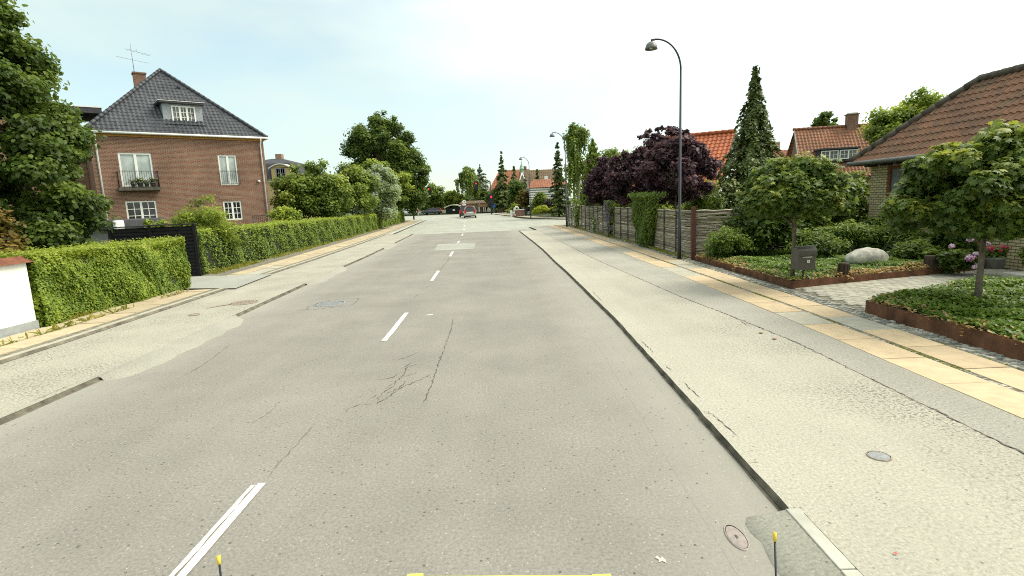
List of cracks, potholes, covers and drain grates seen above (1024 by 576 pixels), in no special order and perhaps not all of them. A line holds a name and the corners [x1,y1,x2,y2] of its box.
crack [350,320,454,408]
manhole cover [866,451,893,462]
utility cover [723,524,750,552]
